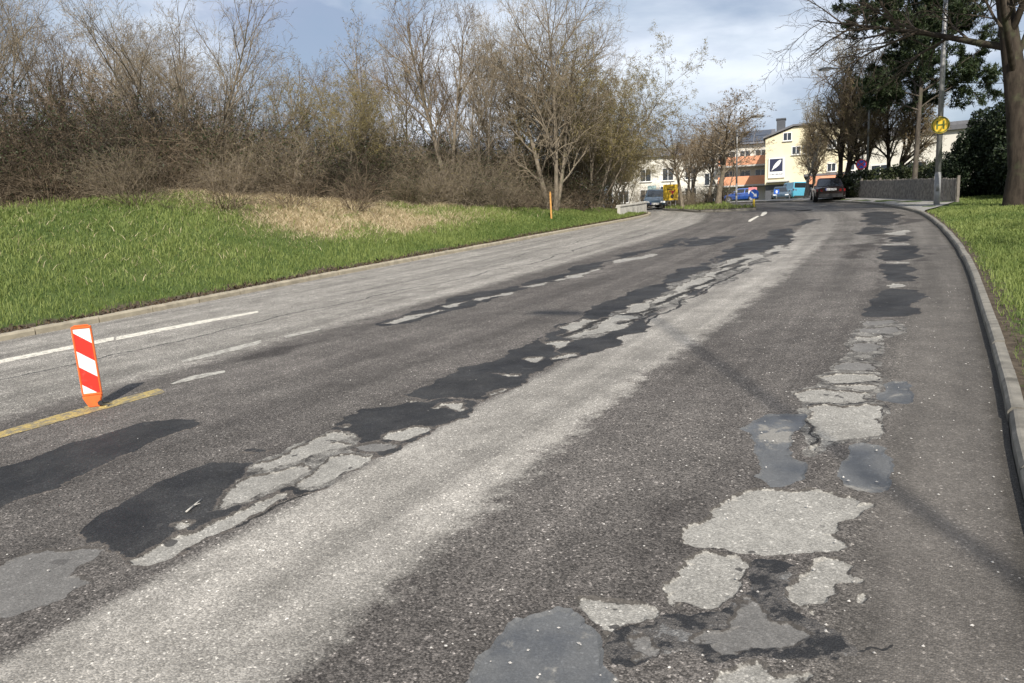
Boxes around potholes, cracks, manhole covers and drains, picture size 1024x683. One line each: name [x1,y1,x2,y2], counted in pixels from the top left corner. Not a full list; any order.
pothole [661,549,752,610]
pothole [857,326,903,334]
pothole [355,442,398,452]
crack [805,401,873,445]
pothole [216,462,313,509]
pothole [784,555,867,616]
pothole [833,362,878,371]
pothole [849,342,882,352]
pothole [806,403,887,451]
pothole [818,372,884,383]
pothole [679,487,876,556]
